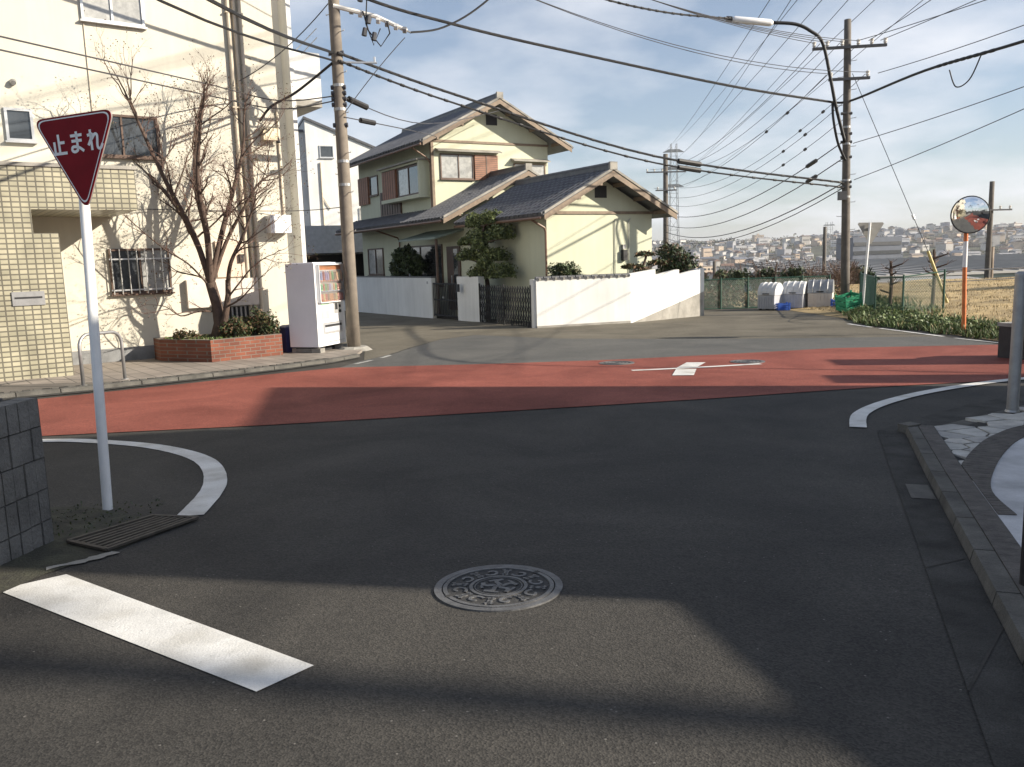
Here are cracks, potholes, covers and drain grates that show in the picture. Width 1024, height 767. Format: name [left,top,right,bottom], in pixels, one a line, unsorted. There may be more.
drain grate [66,514,199,551]
manhole cover [434,564,563,612]
